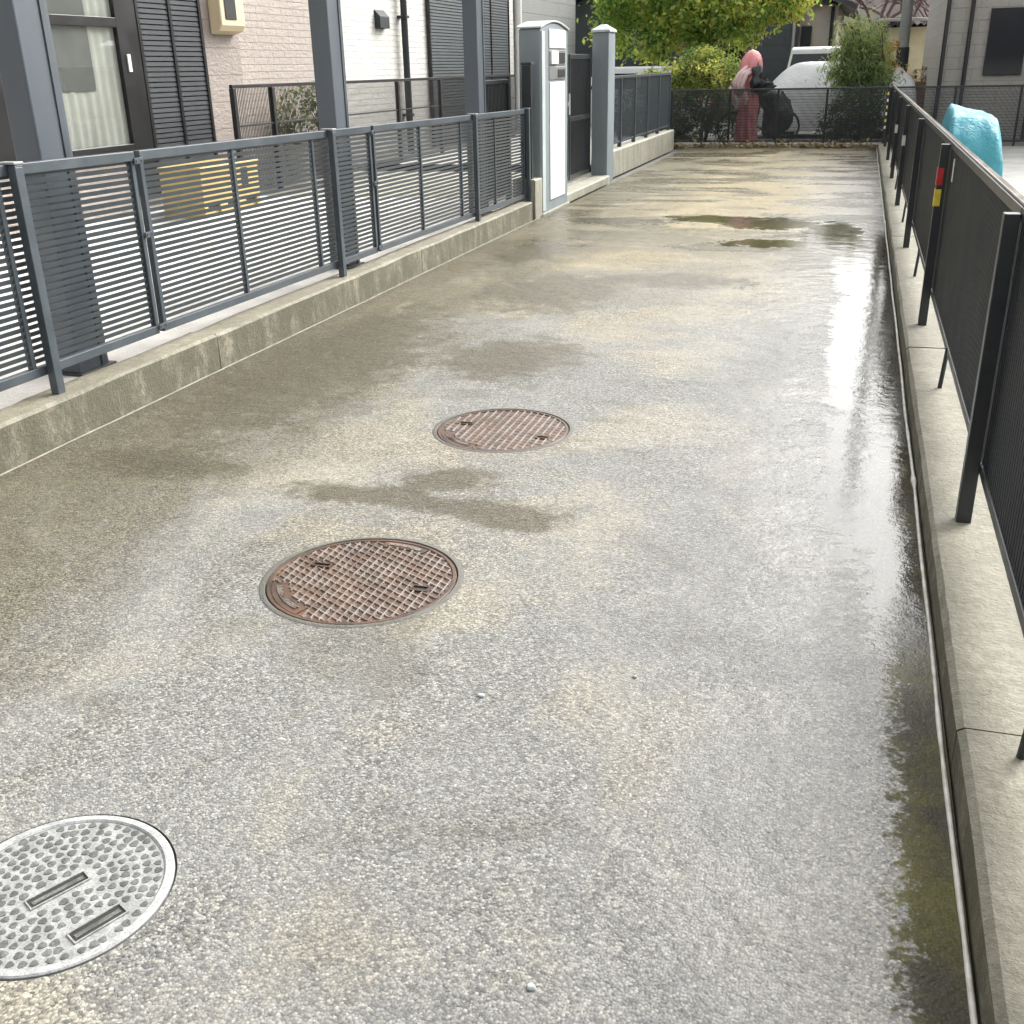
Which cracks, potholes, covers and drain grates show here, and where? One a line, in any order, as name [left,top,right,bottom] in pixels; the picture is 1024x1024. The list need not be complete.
manhole cover [0,815,177,981]
manhole cover [432,408,574,453]
manhole cover [259,537,464,628]
